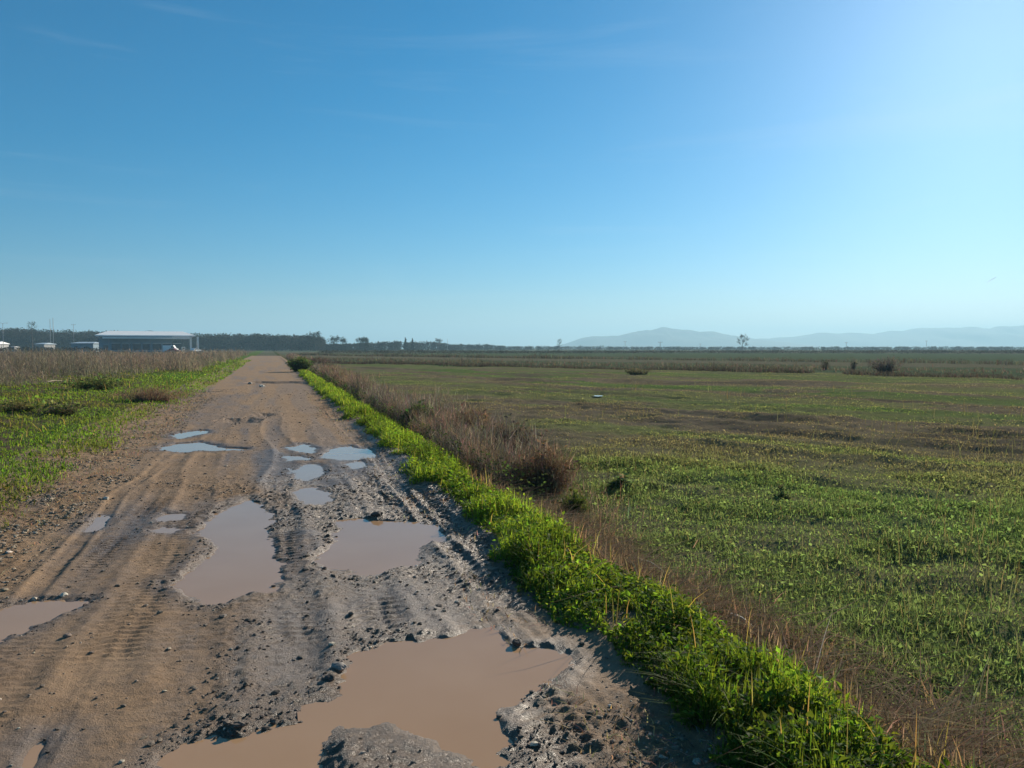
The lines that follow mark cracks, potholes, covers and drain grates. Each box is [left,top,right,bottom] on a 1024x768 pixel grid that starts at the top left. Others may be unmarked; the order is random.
pothole [284,462,332,481]
pothole [302,515,454,578]
pothole [0,594,99,643]
pothole [151,440,252,453]
